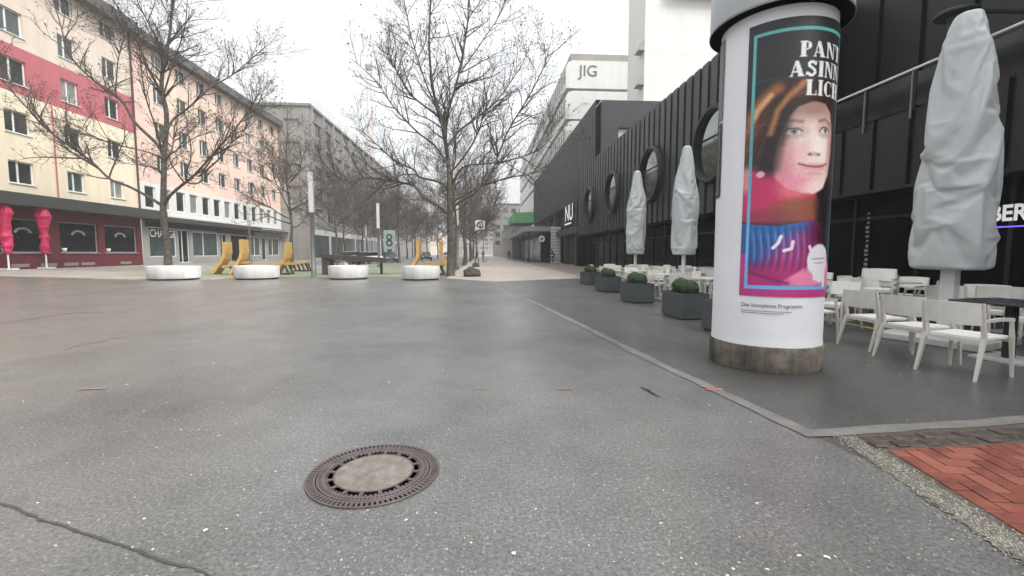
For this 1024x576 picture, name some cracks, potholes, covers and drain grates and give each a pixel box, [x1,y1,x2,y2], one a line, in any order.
crack [0,502,213,576]
manhole cover [304,444,439,509]
